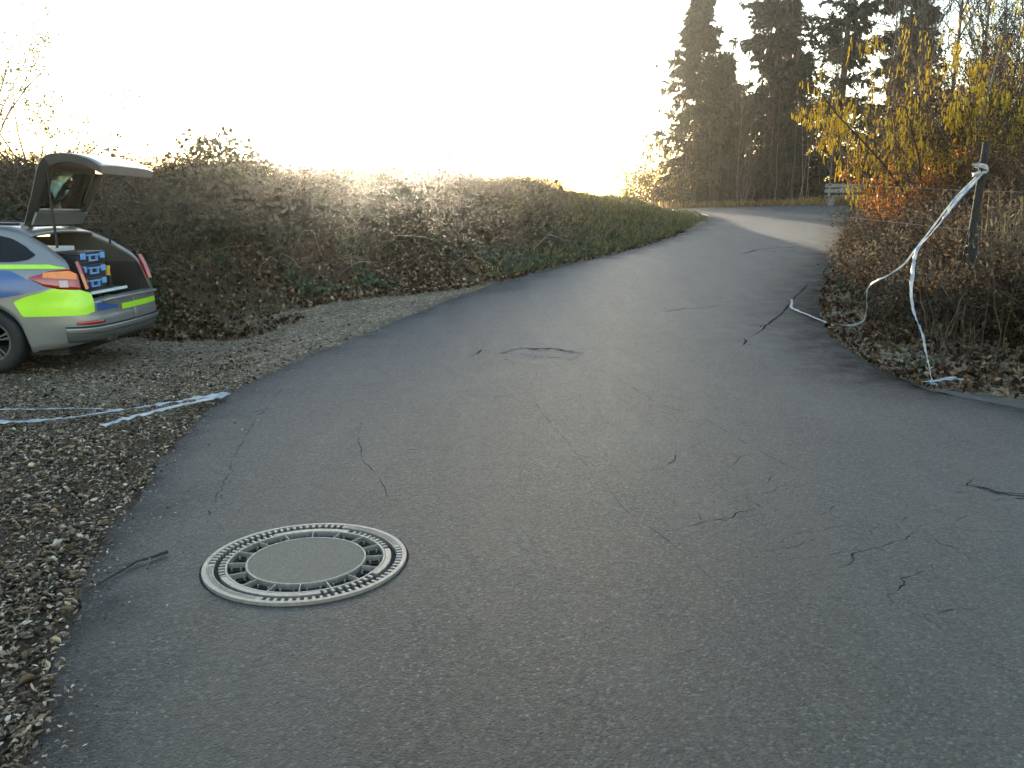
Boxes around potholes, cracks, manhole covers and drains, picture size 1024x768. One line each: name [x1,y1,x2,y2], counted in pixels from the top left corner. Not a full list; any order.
manhole cover [199,523,409,607]
crack [357,422,400,506]
crack [597,369,1009,625]
crack [743,283,808,346]
pothole [500,348,583,364]
crack [959,479,1024,501]
